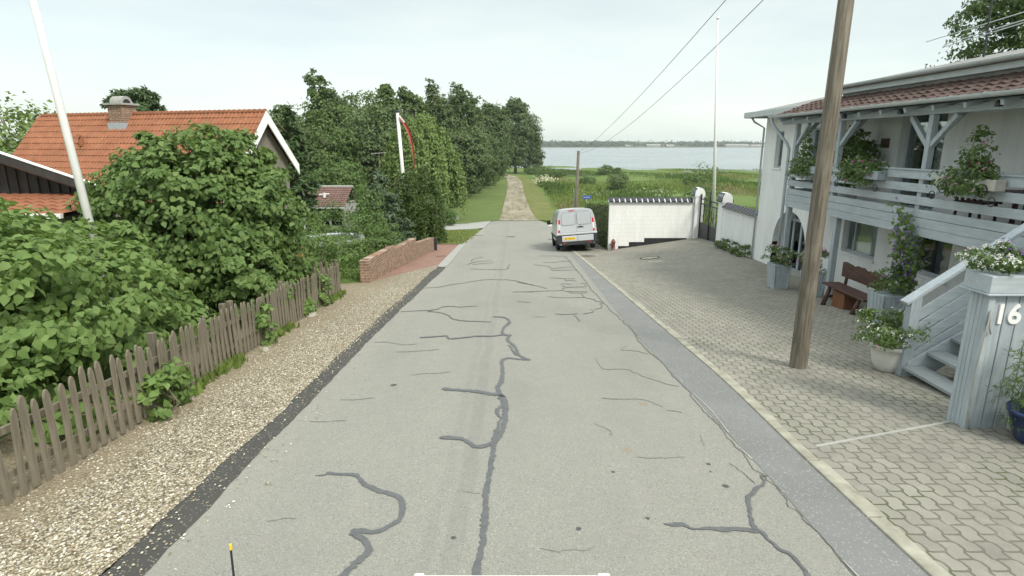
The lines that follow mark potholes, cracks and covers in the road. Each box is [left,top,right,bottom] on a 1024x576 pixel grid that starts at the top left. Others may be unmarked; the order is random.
crack [596,345,681,412]
crack [427,256,603,321]
crack [380,341,437,352]
crack [401,306,491,322]
